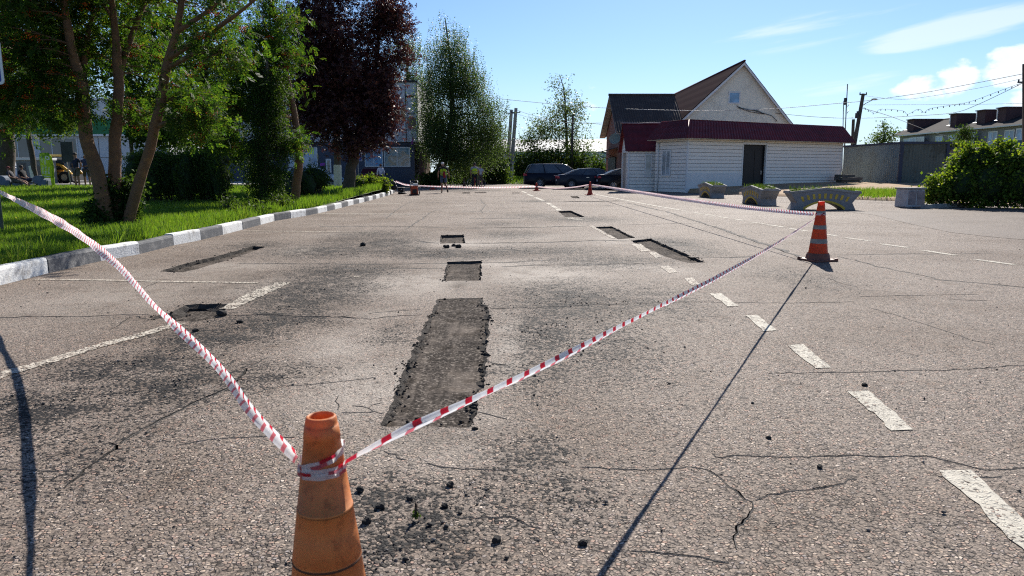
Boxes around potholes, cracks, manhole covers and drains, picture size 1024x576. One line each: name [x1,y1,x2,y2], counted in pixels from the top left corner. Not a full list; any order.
pothole [632,238,703,263]
pothole [380,298,494,430]
crack [582,452,1024,563]
pothole [596,226,635,239]
pothole [160,246,264,273]
crack [768,364,1024,374]
pothole [440,260,483,282]
pothole [147,302,227,322]
pothole [440,234,465,244]
